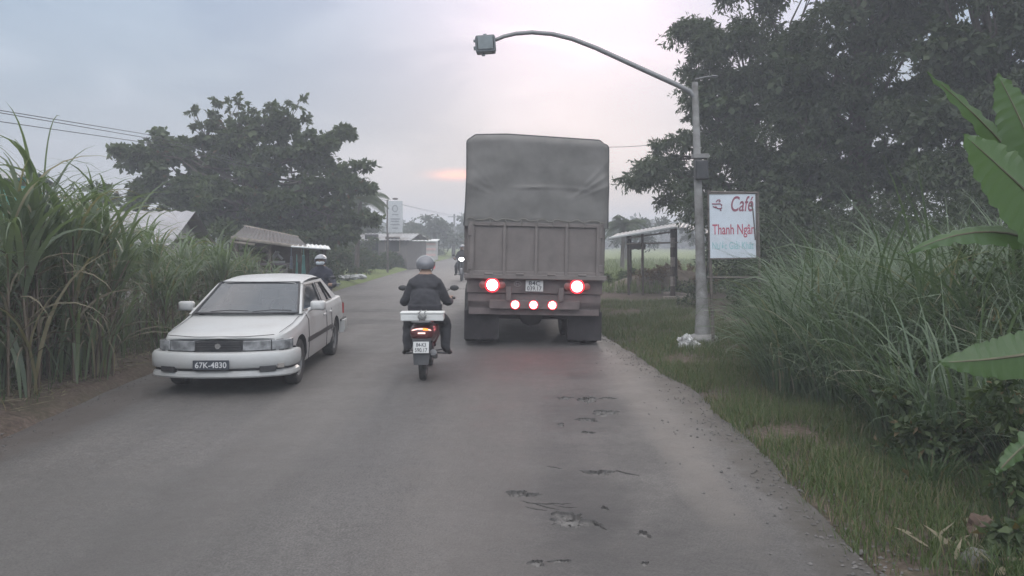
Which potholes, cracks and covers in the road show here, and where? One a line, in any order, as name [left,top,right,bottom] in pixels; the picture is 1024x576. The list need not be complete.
pothole [549,511,603,528]
pothole [506,490,542,498]
crack [523,501,607,530]
